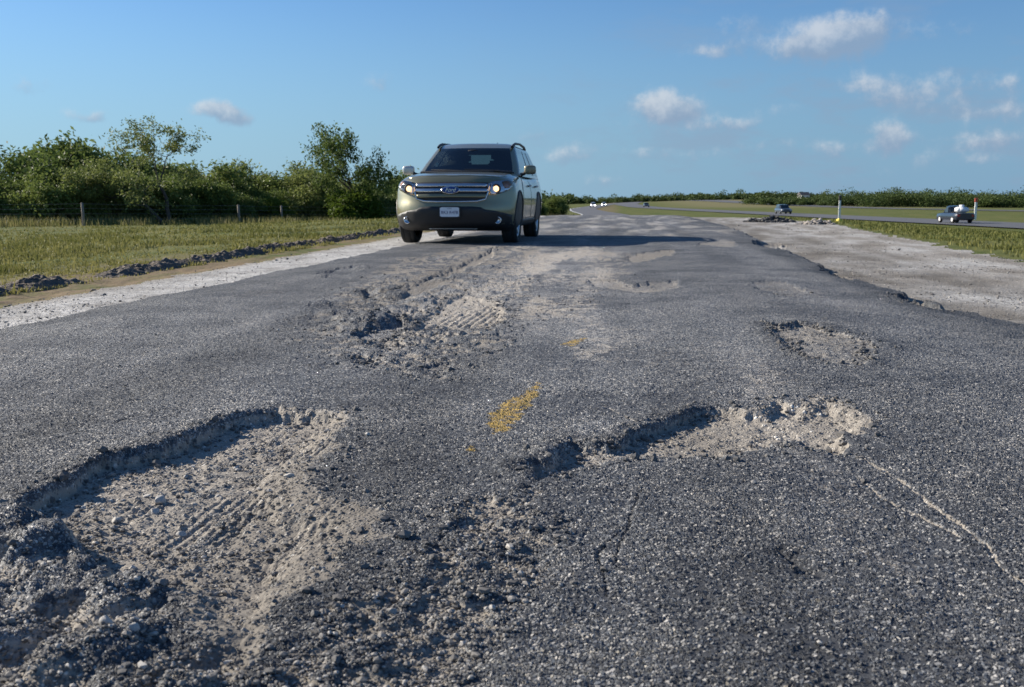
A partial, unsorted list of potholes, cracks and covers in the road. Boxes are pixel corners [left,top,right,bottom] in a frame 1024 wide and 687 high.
pothole [415,360,461,379]
crack [854,455,1024,586]
pothole [348,351,382,365]
pothole [344,310,411,340]
pothole [516,392,888,482]
pothole [584,279,686,293]
pothole [409,294,513,331]
pothole [760,320,890,368]
pothole [361,287,386,299]
crack [595,486,645,596]
pothole [365,335,419,351]
pothole [9,403,433,687]
